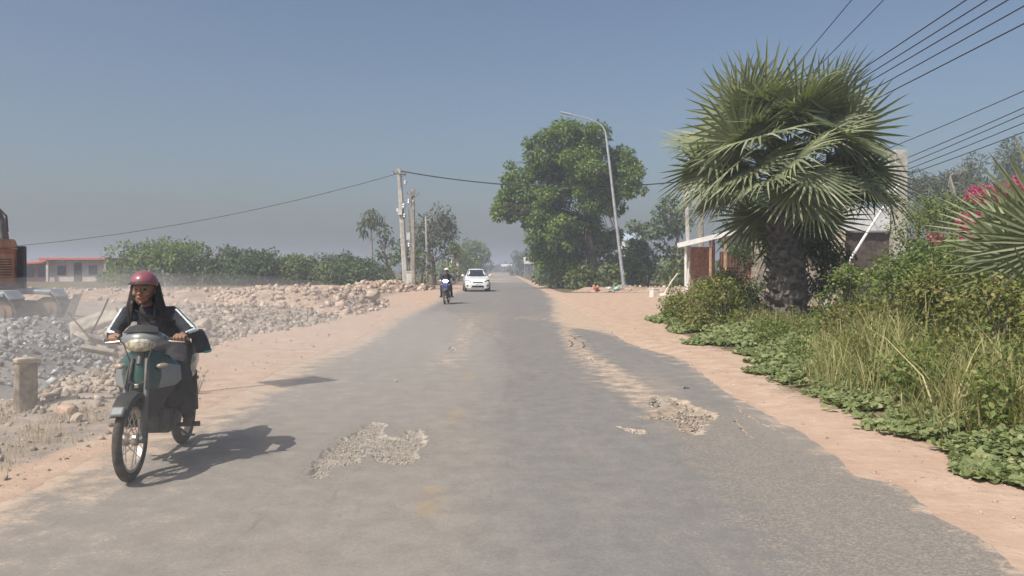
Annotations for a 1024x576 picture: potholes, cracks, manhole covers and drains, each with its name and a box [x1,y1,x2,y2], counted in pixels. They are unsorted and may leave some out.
crack [733,404,785,439]
pothole [307,422,429,479]
pothole [616,426,647,435]
crack [568,335,599,349]
pothole [640,395,719,435]
